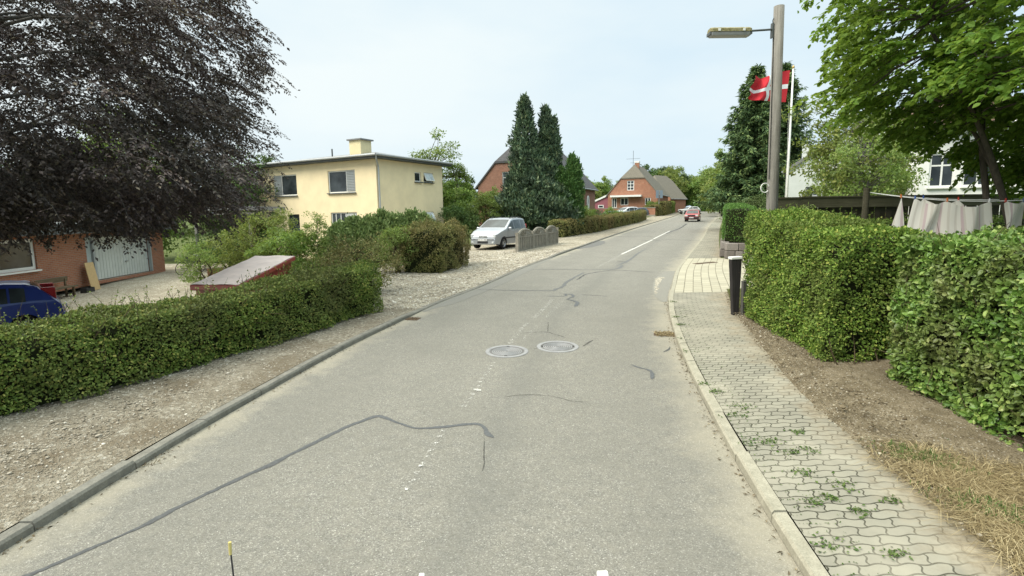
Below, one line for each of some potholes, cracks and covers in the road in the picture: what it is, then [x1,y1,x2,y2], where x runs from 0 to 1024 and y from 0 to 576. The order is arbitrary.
manhole cover [486,345,528,358]
manhole cover [537,341,579,353]
